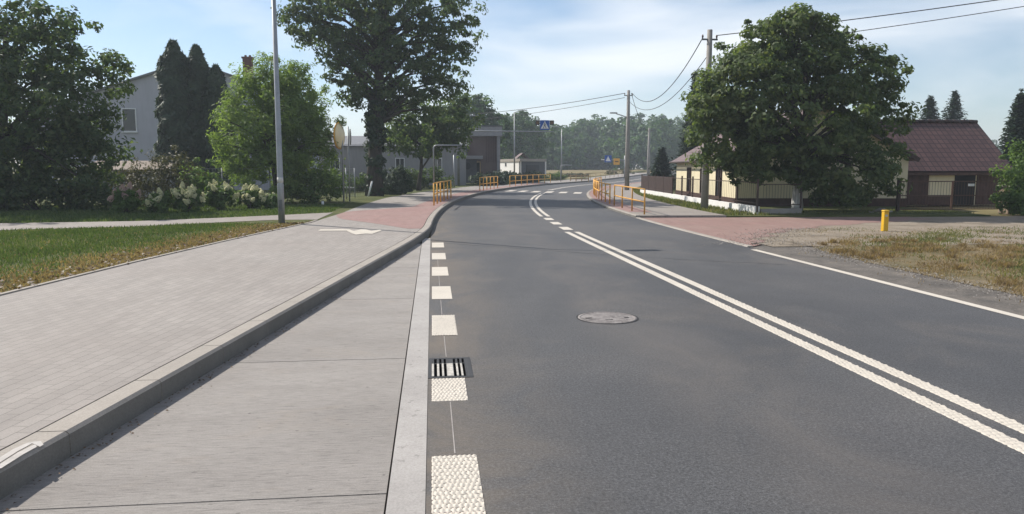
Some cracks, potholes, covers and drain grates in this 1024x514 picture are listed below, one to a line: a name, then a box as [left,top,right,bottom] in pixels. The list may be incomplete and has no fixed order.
drain grate [428,357,474,379]
manhole cover [576,311,639,324]
